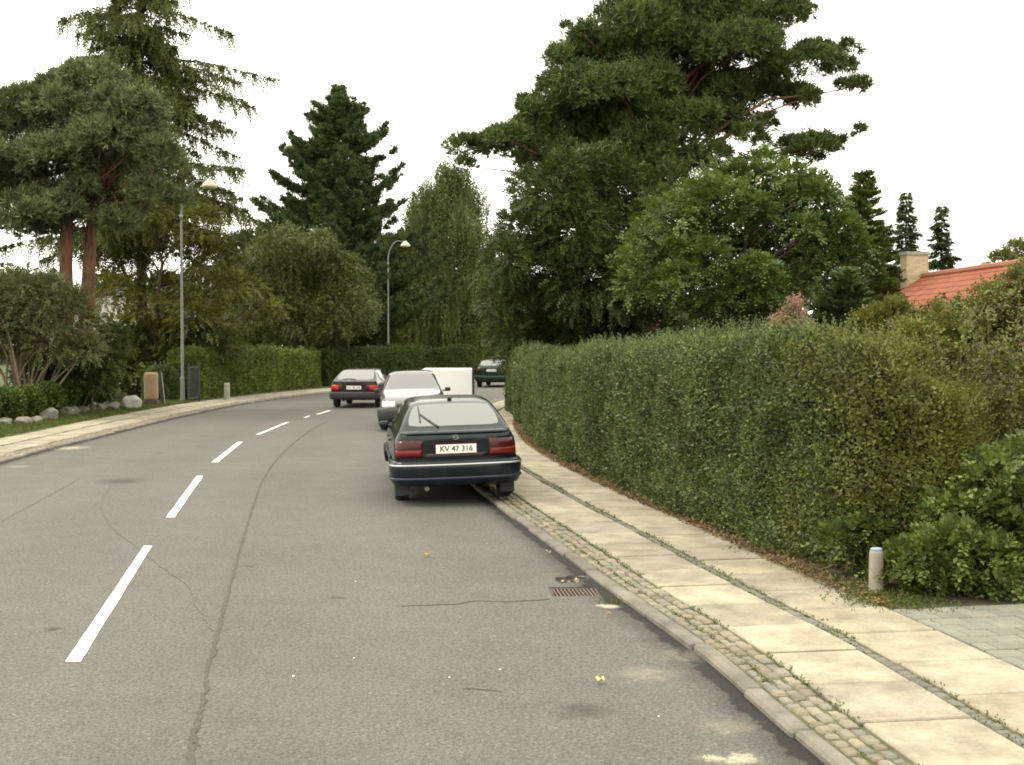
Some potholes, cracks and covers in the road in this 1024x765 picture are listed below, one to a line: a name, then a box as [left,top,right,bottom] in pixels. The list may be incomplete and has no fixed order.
crack [1,479,77,521]
drain grate [549,587,601,596]
crack [100,422,326,765]
